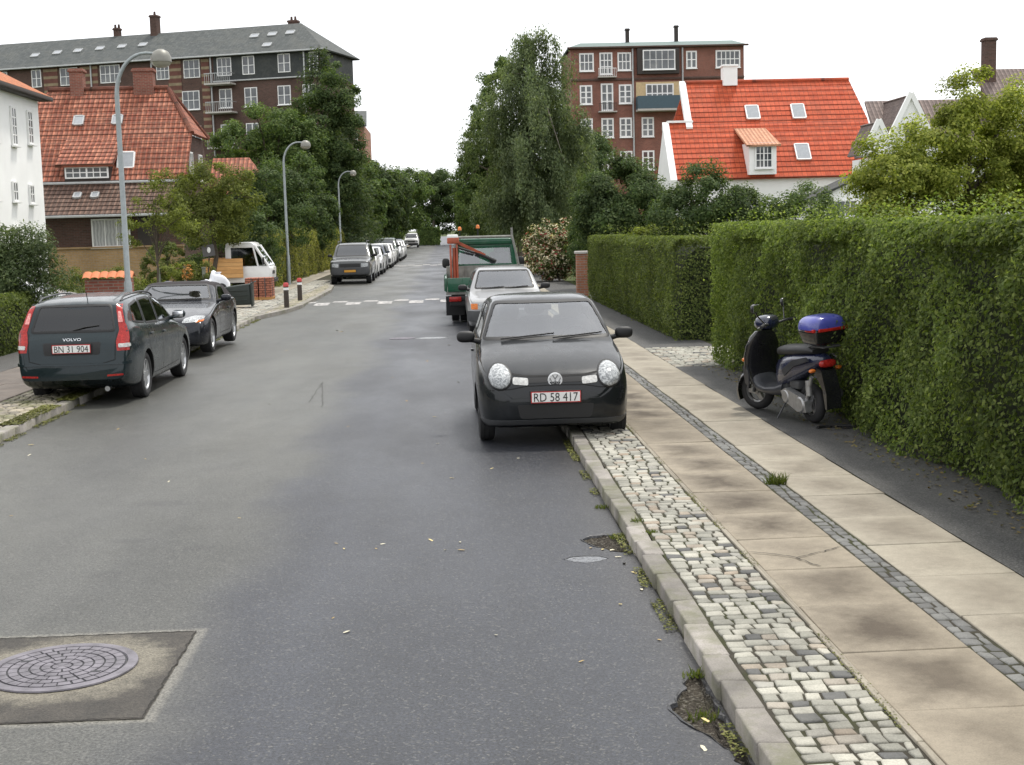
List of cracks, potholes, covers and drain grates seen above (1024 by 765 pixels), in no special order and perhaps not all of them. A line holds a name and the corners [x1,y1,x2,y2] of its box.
pothole [580,533,628,552]
pothole [668,674,752,765]
manhole cover [0,643,139,693]
